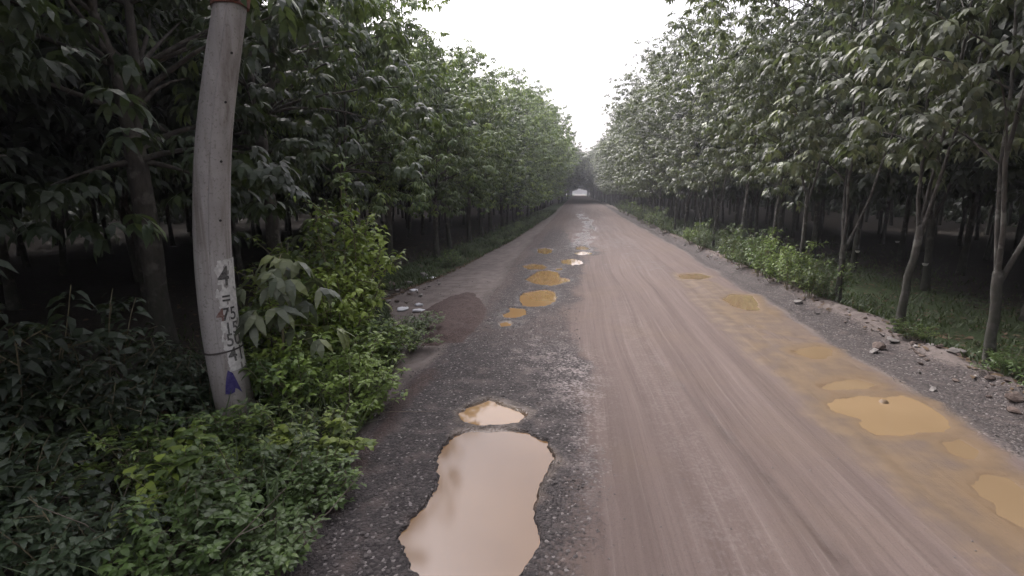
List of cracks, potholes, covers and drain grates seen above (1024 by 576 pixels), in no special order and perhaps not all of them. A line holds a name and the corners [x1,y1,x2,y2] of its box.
pothole [518,288,558,307]
pothole [964,471,1024,533]
pothole [395,425,556,576]
pothole [454,397,528,427]
pothole [723,294,761,311]
pothole [501,306,528,318]
pothole [821,391,959,438]
pothole [790,345,838,360]
pothole [936,436,987,464]
pothole [524,270,571,286]
pothole [815,377,883,392]
pothole [496,319,515,327]
